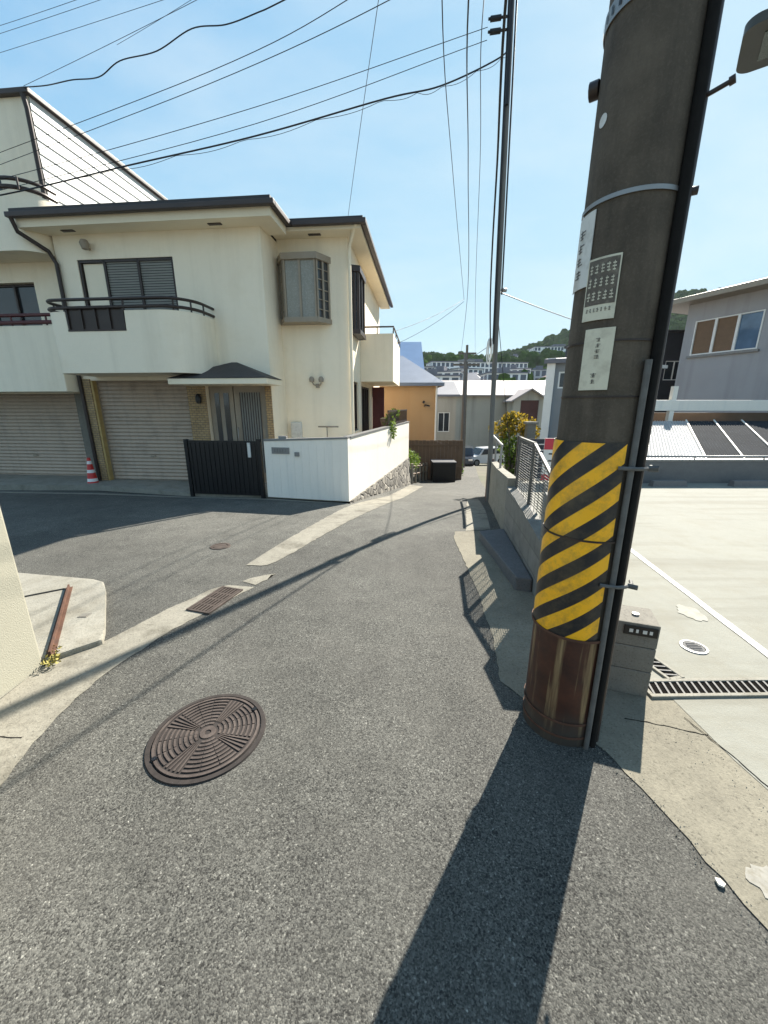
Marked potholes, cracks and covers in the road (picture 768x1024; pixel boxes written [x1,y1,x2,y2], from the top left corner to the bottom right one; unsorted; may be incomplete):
drain grate [652,657,685,679]
drain grate [186,586,243,615]
manhole cover [679,640,709,655]
drain grate [647,677,768,699]
crack [624,718,708,735]
manhole cover [144,694,266,786]
